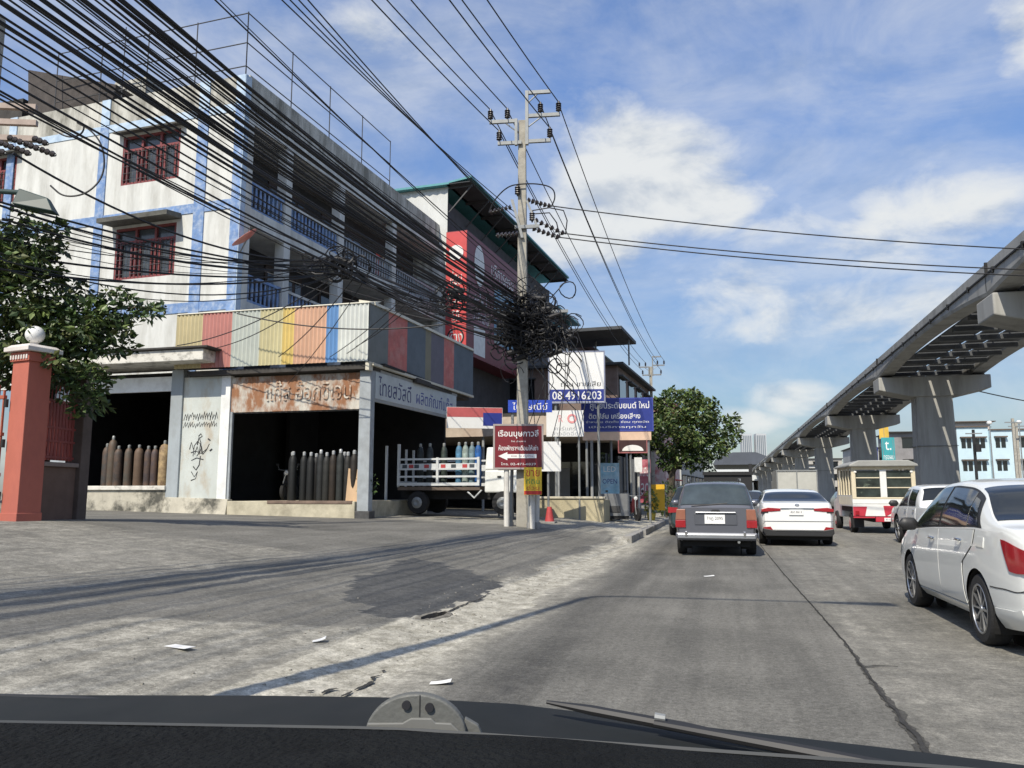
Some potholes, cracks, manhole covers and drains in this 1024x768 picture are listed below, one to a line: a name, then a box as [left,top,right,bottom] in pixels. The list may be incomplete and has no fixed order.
crack [757,540,931,753]
pothole [415,611,453,621]
crack [308,670,385,696]
